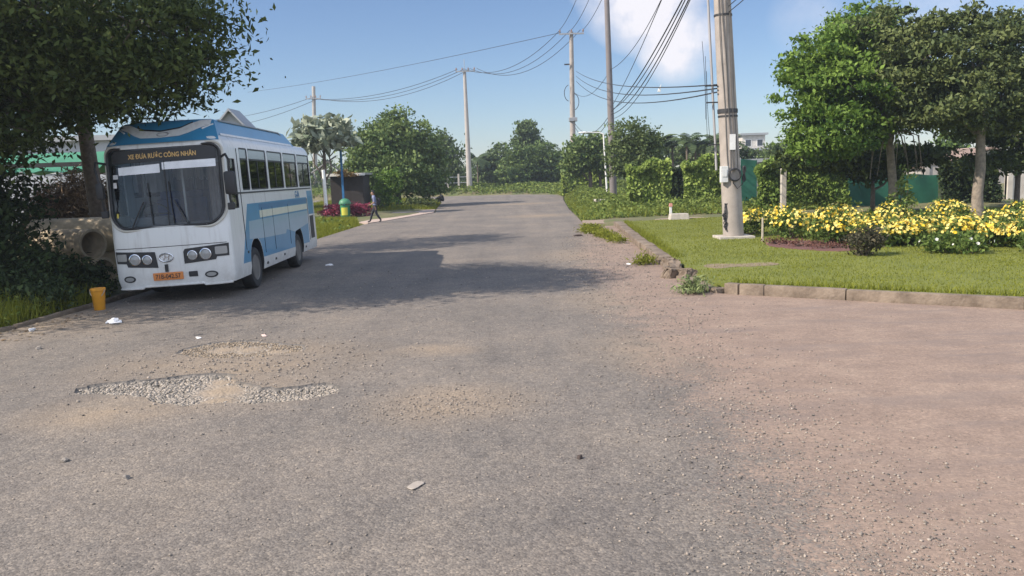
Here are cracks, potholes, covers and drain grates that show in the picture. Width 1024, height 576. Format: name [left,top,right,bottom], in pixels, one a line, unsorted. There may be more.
pothole [74,373,341,407]
pothole [176,340,306,358]
